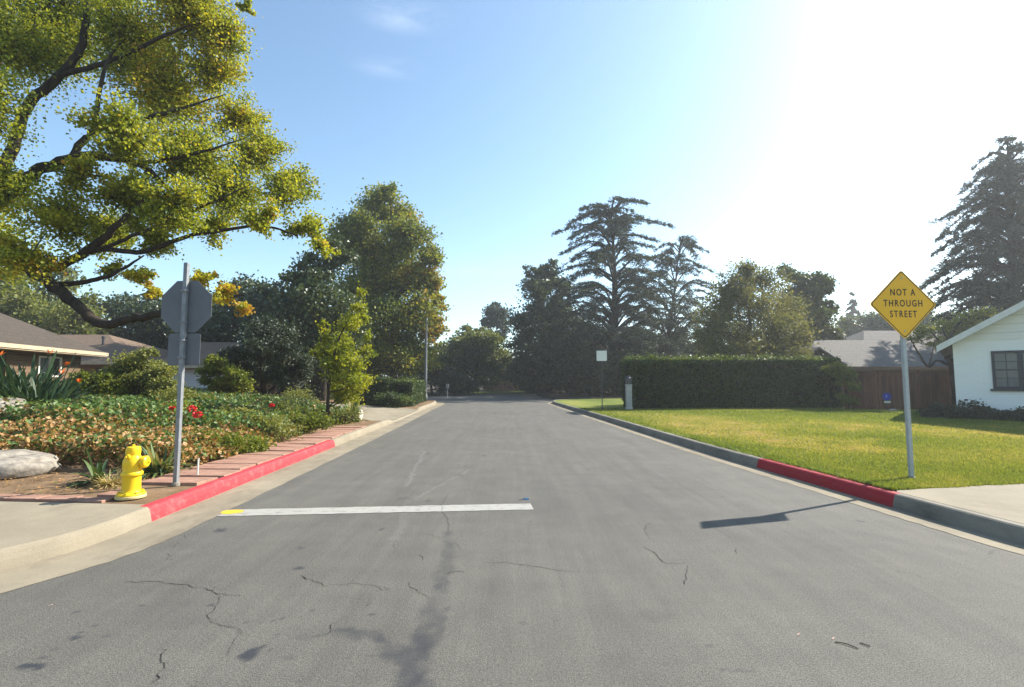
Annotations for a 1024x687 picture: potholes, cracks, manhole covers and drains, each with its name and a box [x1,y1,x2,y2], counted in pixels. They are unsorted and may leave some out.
crack [126,581,243,655]
